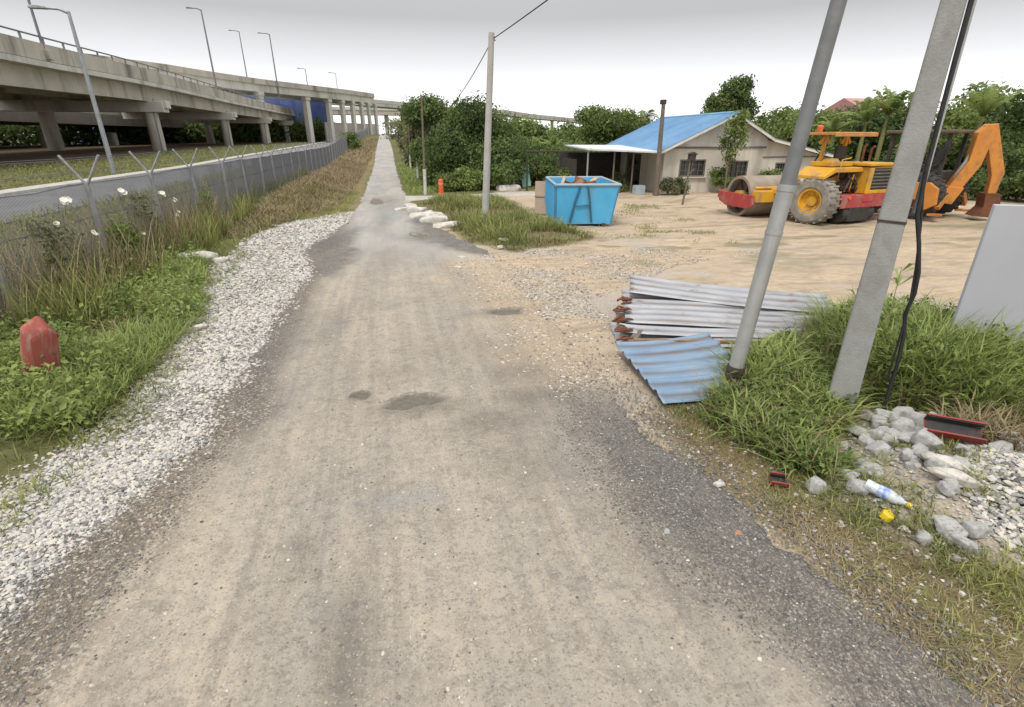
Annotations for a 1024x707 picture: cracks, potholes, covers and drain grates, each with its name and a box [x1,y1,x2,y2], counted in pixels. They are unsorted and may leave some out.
pothole [378,392,453,411]
pothole [485,307,524,316]
pothole [348,390,372,400]
